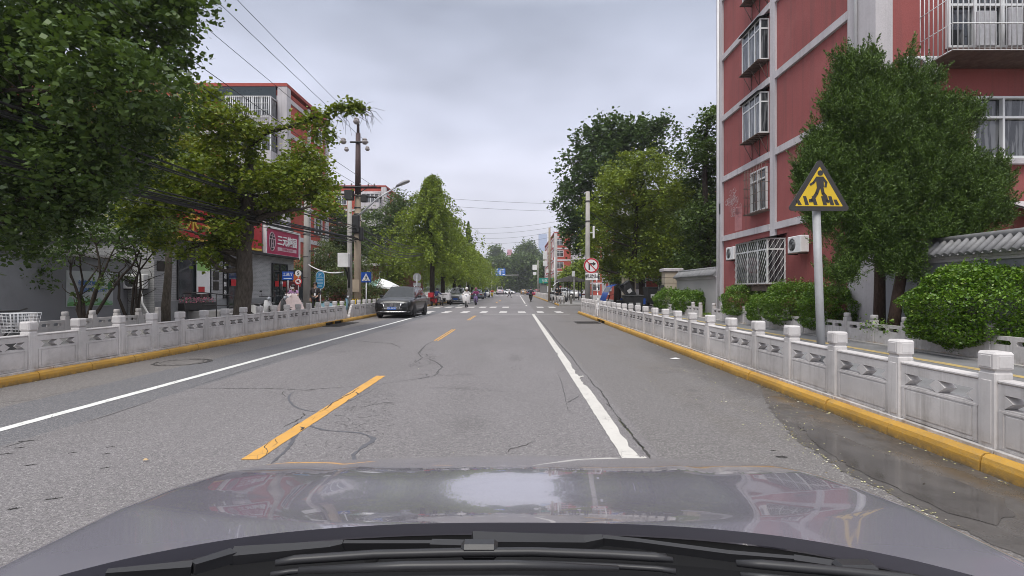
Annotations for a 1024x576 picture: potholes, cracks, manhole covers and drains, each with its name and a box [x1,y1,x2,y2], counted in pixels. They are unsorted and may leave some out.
crack [209,386,404,458]
crack [377,342,515,392]
